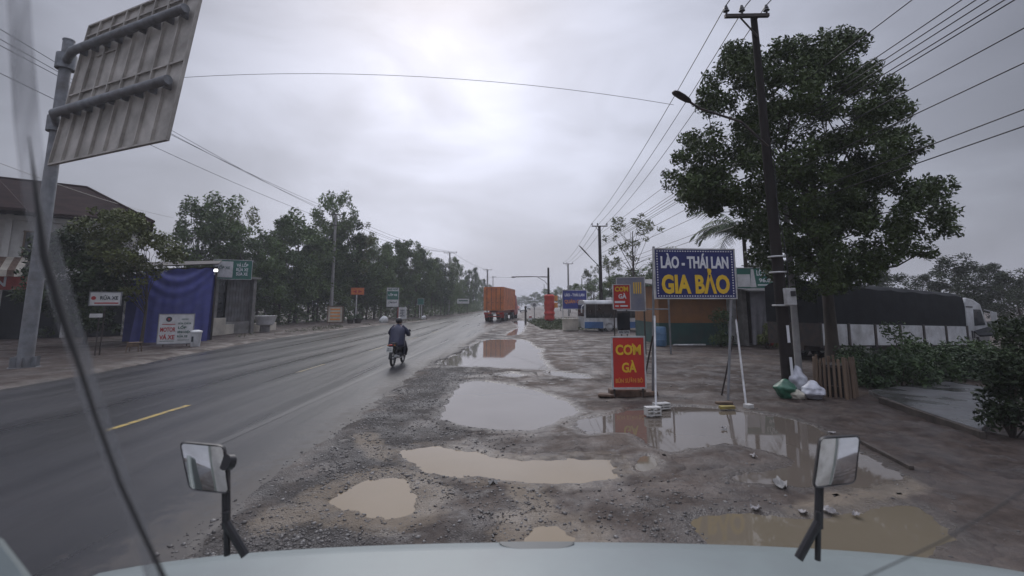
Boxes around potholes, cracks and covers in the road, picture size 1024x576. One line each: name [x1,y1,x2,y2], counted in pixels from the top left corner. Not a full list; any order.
pothole [650,493,1005,567]
pothole [428,338,569,371]
pothole [561,401,937,498]
pothole [421,378,595,435]
pothole [294,469,448,535]
pothole [493,511,602,543]
pothole [380,440,647,496]
